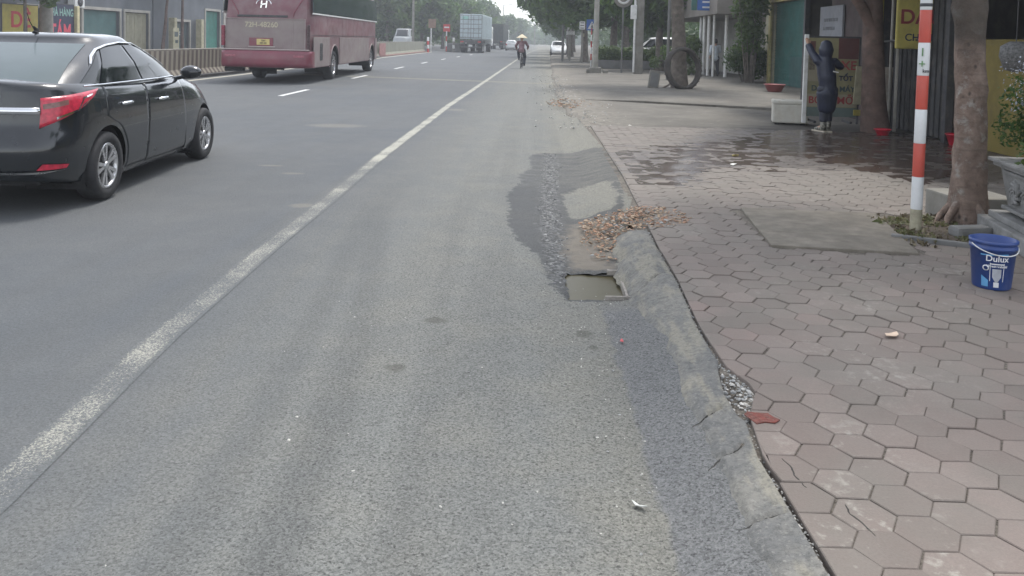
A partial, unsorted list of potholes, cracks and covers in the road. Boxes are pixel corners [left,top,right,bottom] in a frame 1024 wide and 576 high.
crack [708,444,743,471]
crack [845,504,876,536]
